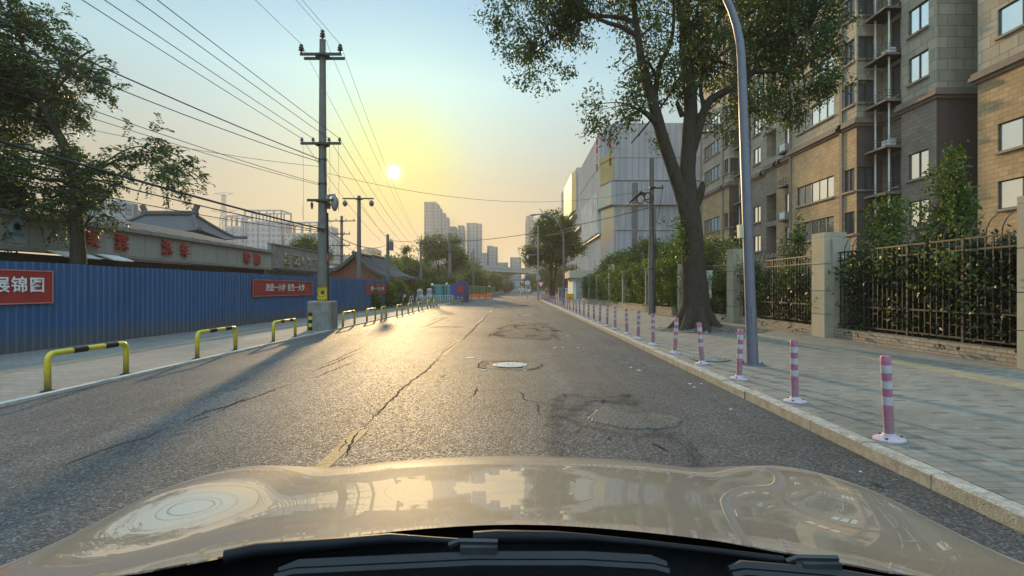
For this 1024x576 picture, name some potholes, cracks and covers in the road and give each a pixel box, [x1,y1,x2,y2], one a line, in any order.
crack [339,430,360,457]
crack [59,385,280,467]
crack [519,391,683,451]
